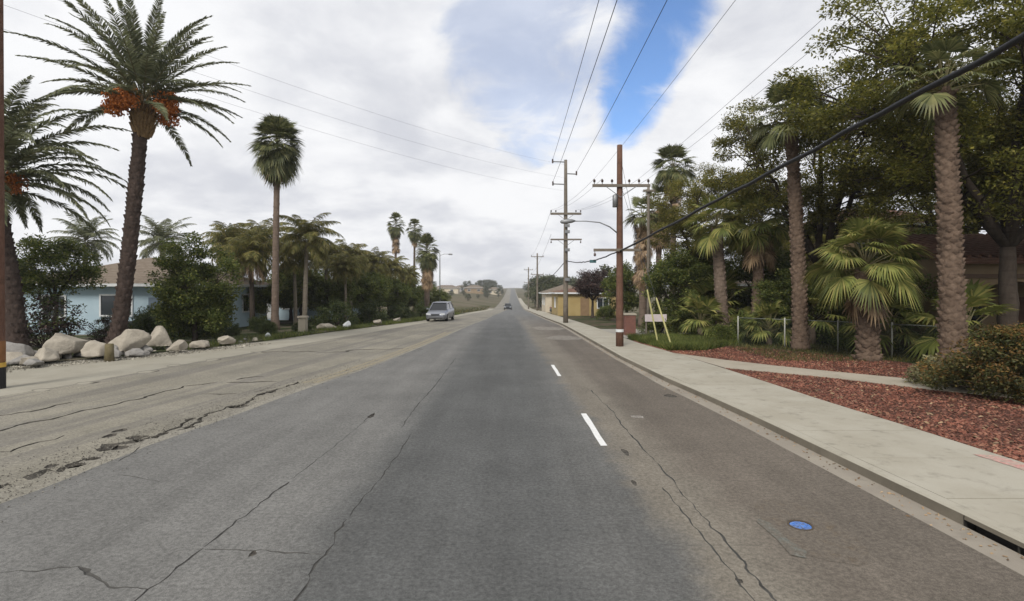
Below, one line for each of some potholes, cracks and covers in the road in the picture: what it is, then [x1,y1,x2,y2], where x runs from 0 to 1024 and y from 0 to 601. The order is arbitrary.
crack [0,358,456,601]
drain grate [964,515,1024,556]
crack [591,390,777,601]
manhole cover [787,520,815,531]
